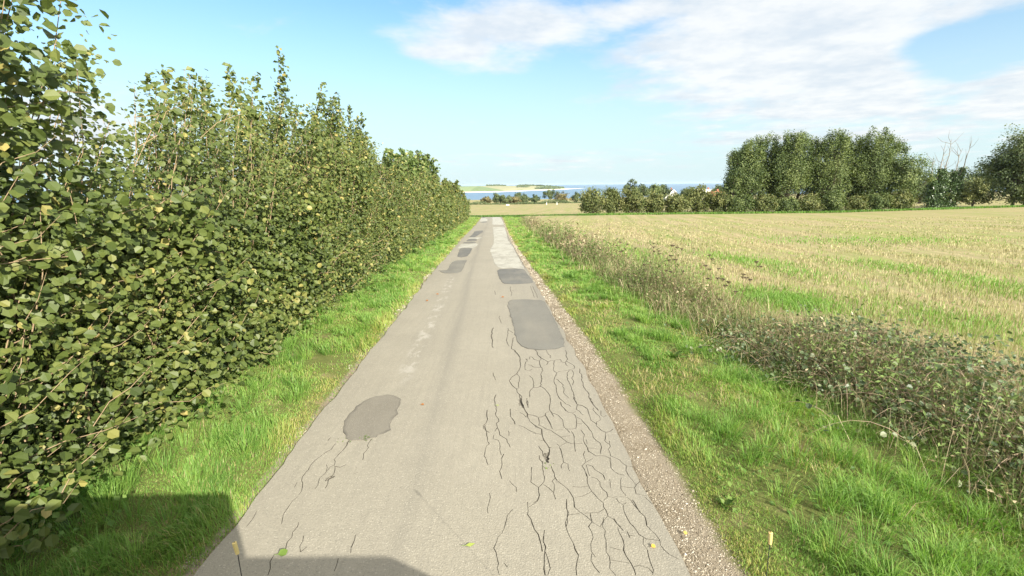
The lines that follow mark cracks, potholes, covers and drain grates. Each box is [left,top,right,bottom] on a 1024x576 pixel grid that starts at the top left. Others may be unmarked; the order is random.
crack [483,329,678,576]
crack [268,438,371,574]
